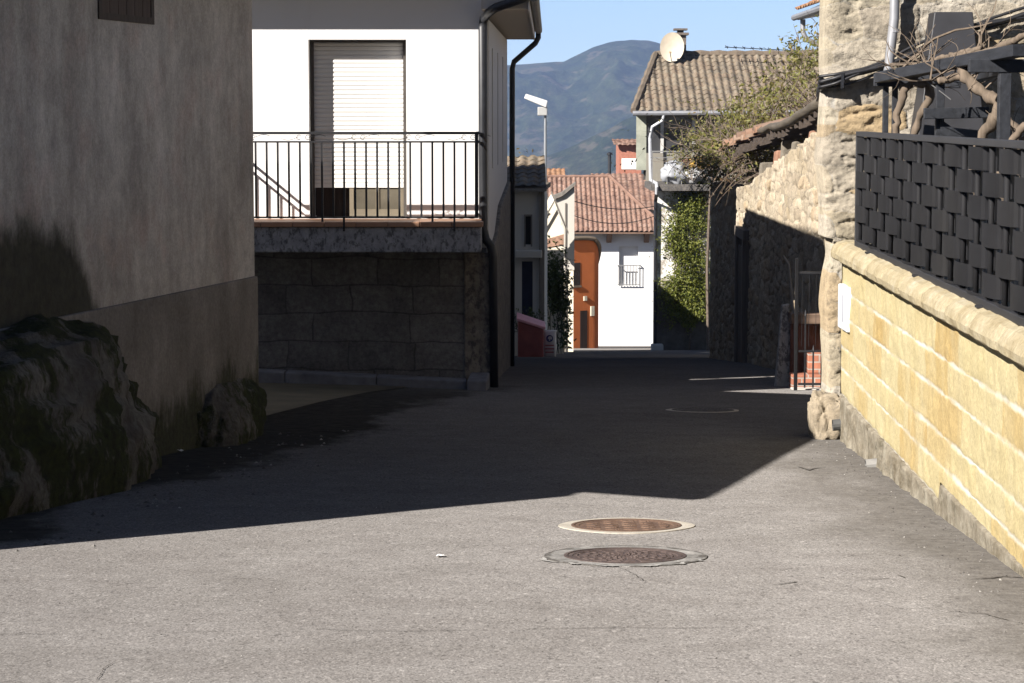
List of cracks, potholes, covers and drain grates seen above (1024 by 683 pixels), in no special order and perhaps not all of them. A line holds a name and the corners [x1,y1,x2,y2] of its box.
manhole cover [558,517,695,534]
manhole cover [540,545,707,567]
